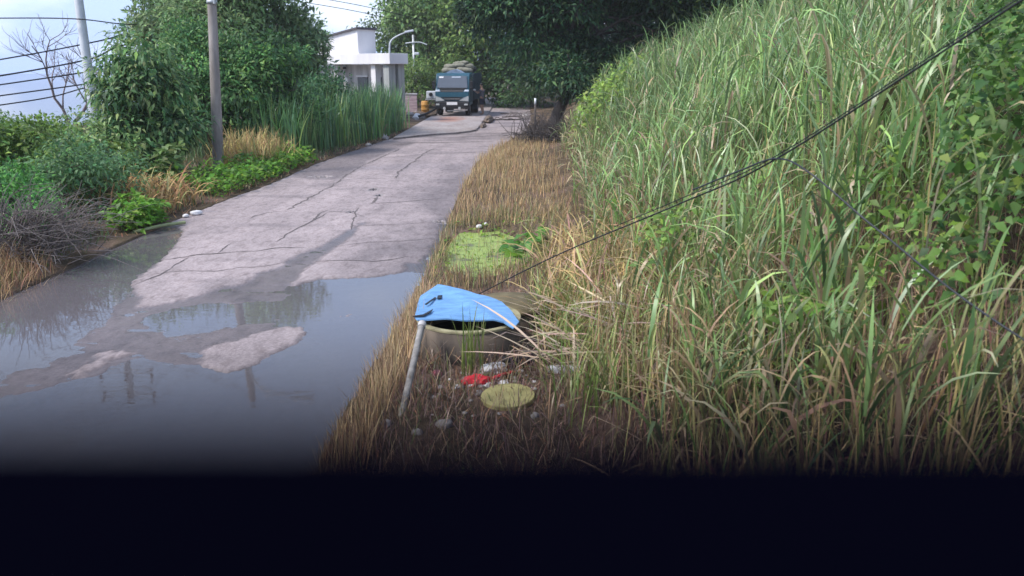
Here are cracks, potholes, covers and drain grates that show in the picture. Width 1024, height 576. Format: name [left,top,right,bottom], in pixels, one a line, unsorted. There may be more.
crack [135,197,440,285]
crack [394,131,505,178]
